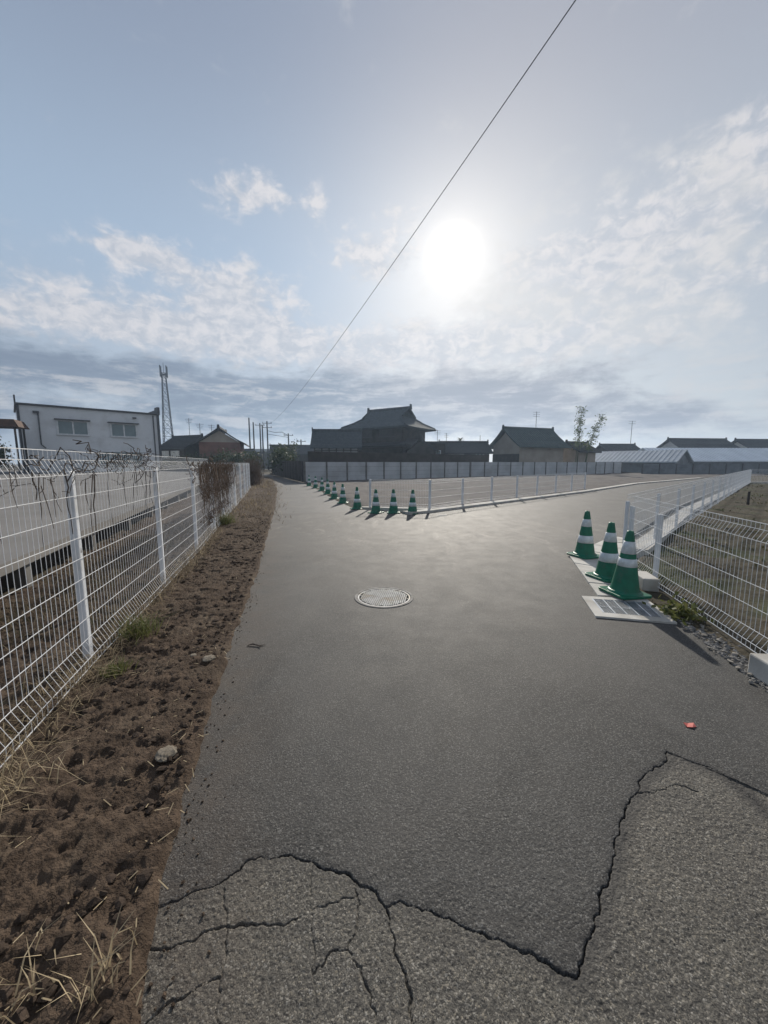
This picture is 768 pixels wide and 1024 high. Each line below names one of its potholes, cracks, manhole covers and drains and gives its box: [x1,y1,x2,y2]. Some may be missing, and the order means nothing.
manhole cover [354,587,414,608]
drain grate [581,596,677,625]
crack [336,769,697,975]
